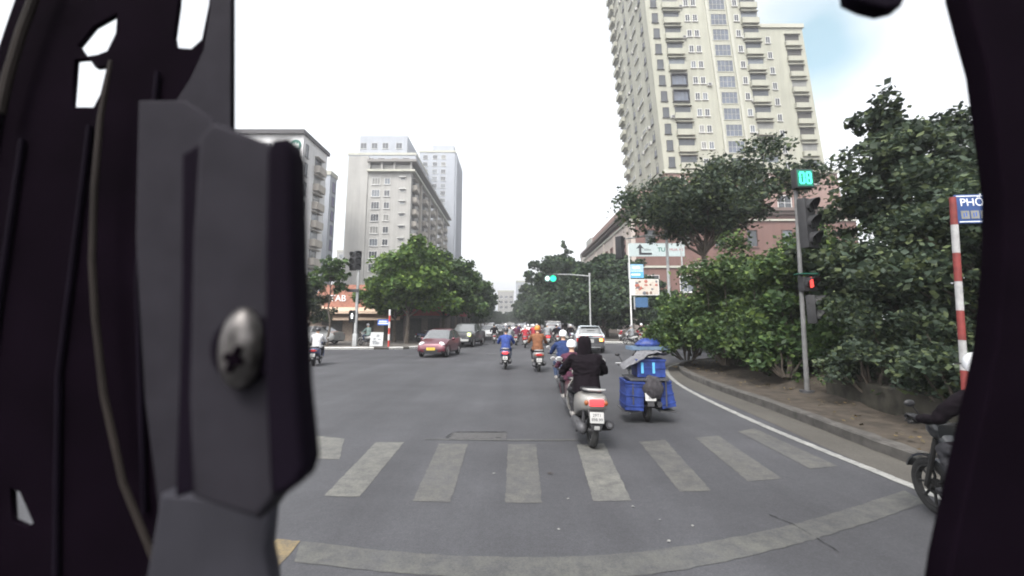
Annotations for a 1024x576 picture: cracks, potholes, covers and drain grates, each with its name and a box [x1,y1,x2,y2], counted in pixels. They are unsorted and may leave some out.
manhole cover [446,431,507,439]
